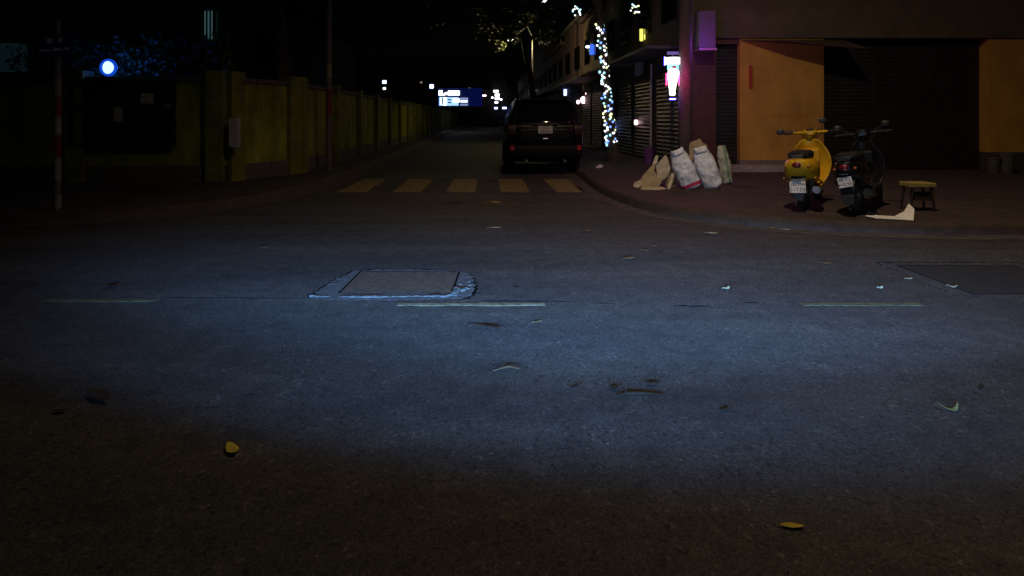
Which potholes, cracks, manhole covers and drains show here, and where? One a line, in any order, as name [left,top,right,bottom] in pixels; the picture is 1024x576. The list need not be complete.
manhole cover [308,268,478,302]
manhole cover [876,262,1024,299]
